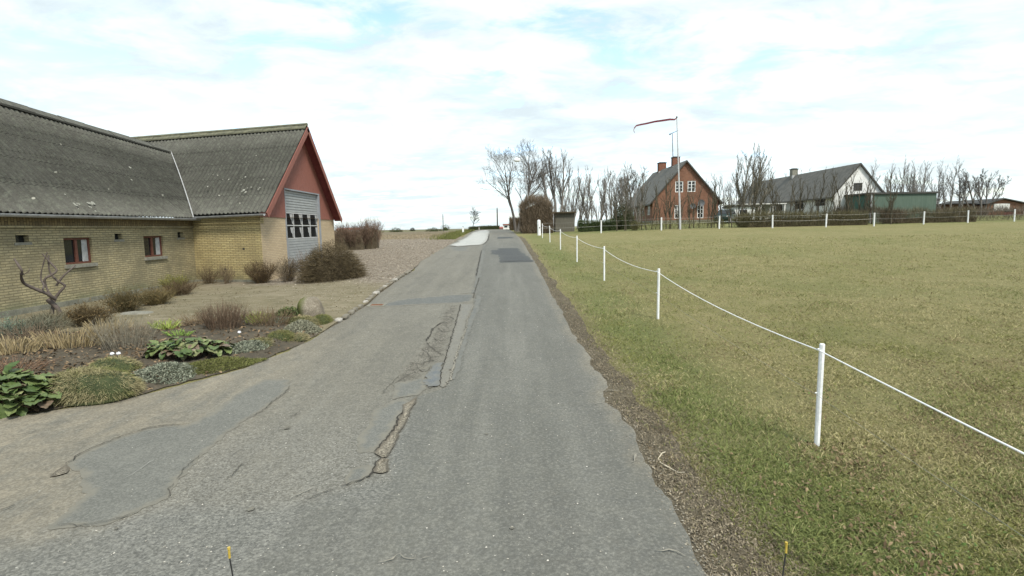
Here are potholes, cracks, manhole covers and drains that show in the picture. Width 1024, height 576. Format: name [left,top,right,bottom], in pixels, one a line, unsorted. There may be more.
crack [292,411,403,499]
crack [383,293,474,393]
